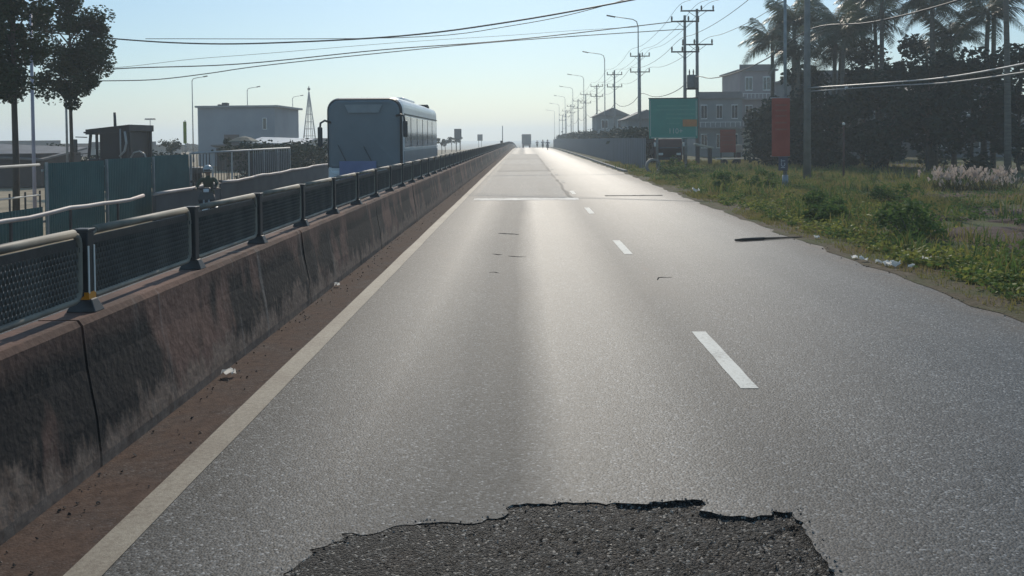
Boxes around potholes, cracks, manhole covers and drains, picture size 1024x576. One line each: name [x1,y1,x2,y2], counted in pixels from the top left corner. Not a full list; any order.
pothole [281,498,842,576]
